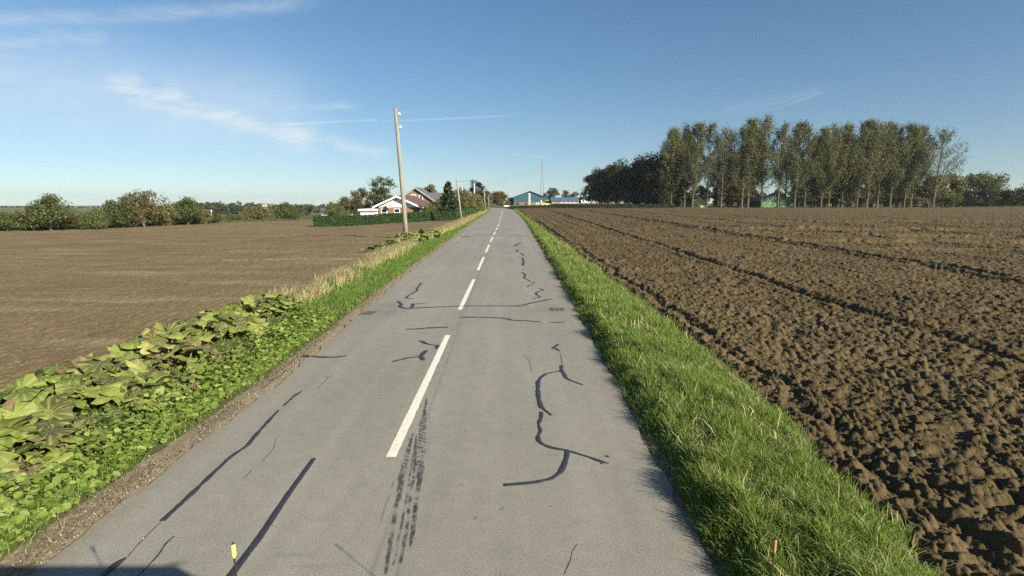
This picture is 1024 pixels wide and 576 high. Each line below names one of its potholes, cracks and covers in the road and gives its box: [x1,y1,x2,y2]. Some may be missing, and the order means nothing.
crack [127,522,175,576]
